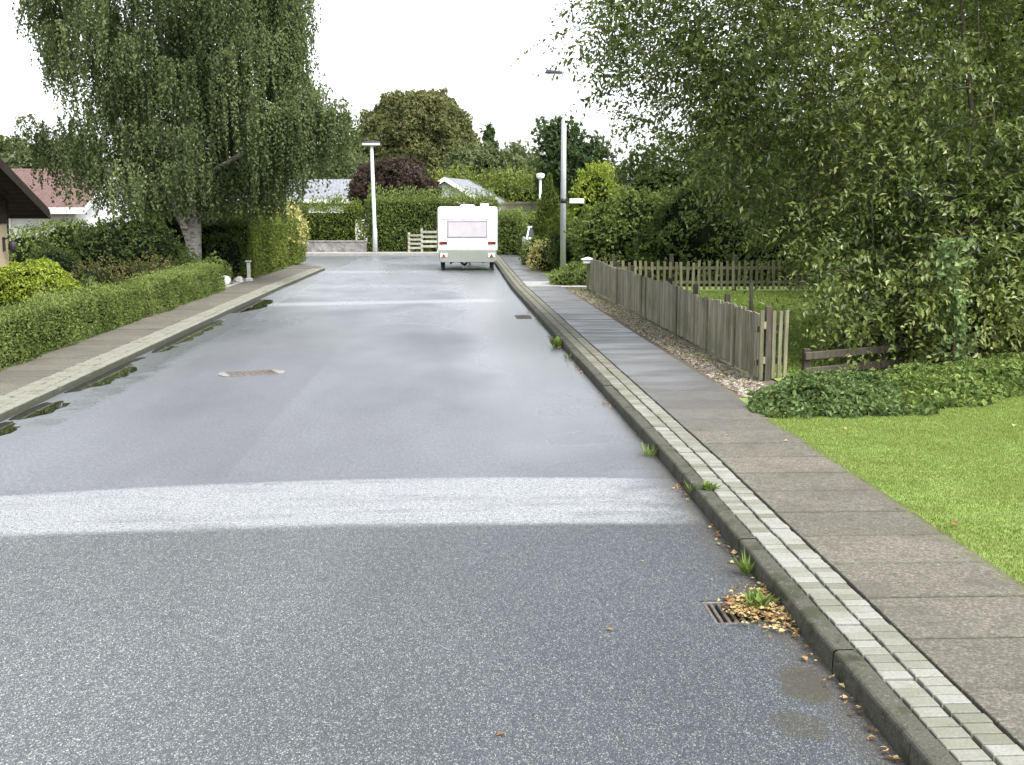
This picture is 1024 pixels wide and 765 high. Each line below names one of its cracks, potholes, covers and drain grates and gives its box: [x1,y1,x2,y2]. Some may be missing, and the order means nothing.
manhole cover [218,369,285,377]
drain grate [701,601,788,624]
